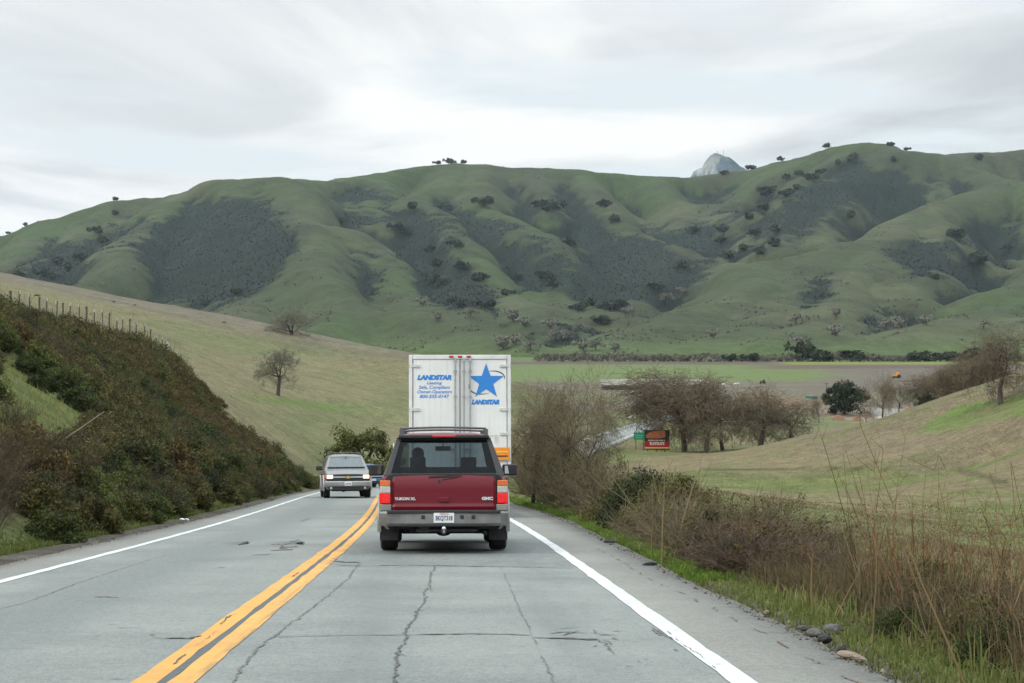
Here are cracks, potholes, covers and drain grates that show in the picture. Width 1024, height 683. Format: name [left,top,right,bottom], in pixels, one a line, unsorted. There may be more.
crack [232,558,647,683]
